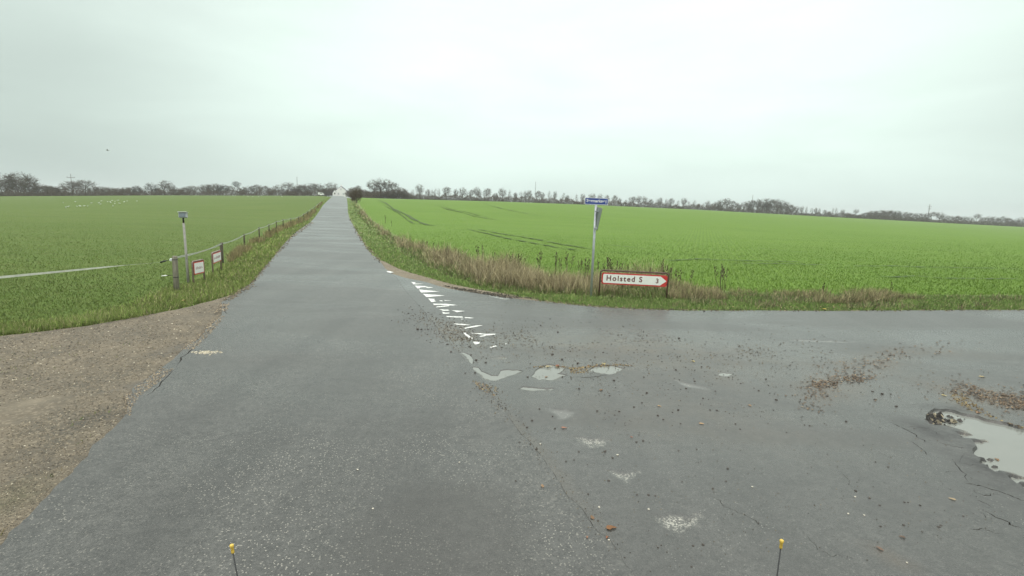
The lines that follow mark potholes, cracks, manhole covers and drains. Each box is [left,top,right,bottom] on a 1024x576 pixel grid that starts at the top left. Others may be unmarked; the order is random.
pothole [588,365,625,375]
crack [890,422,1023,534]
pothole [530,364,568,382]
pothole [926,408,1024,490]
